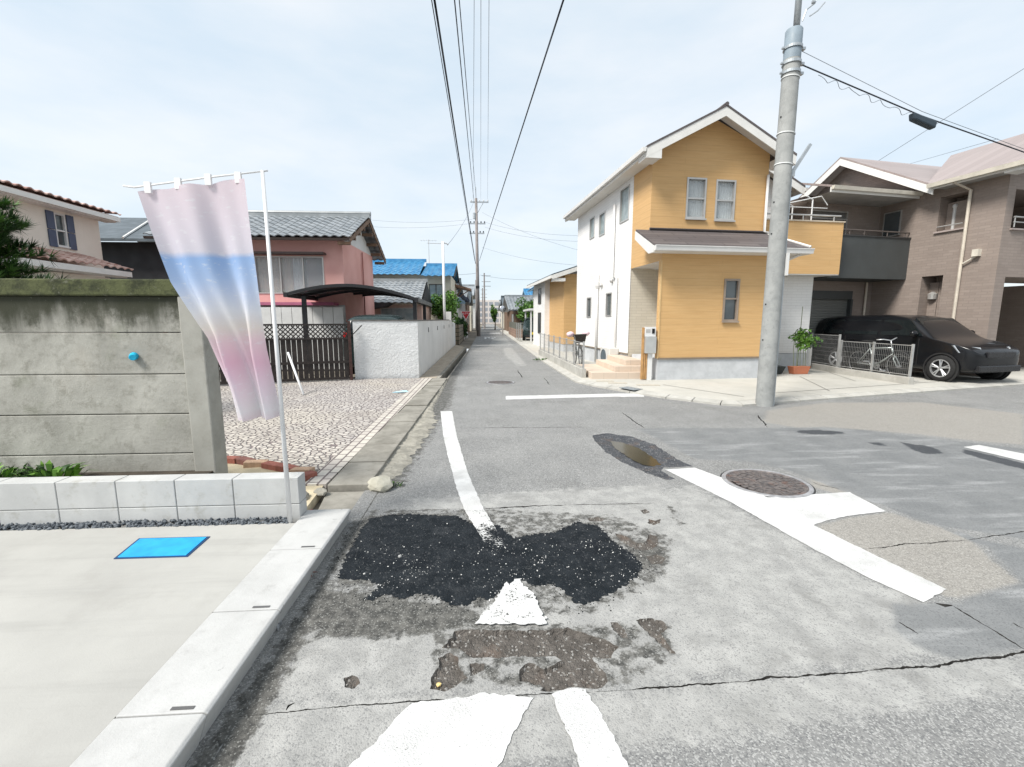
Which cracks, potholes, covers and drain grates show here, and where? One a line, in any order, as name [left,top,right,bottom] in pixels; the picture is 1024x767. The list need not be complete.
pothole [442,627,618,692]
pothole [592,433,691,480]
crack [869,531,1024,549]
crack [240,603,1024,717]
manhole cover [720,469,816,498]
pothole [430,652,468,692]
pothole [636,618,676,654]
pothole [610,622,627,638]
